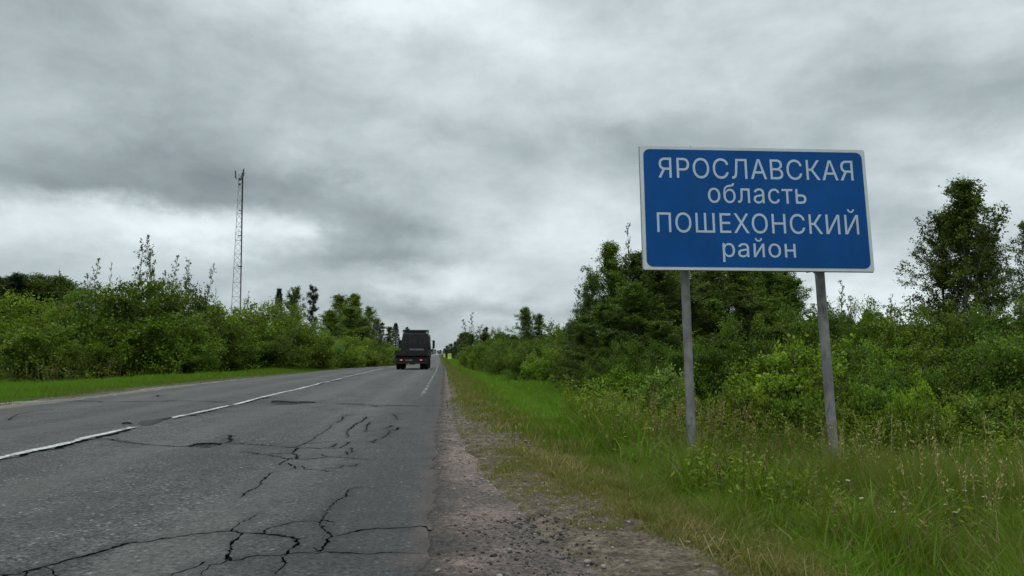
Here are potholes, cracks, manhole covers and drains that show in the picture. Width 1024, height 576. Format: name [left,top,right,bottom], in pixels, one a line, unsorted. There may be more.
crack [0,487,431,576]
crack [111,404,407,497]
